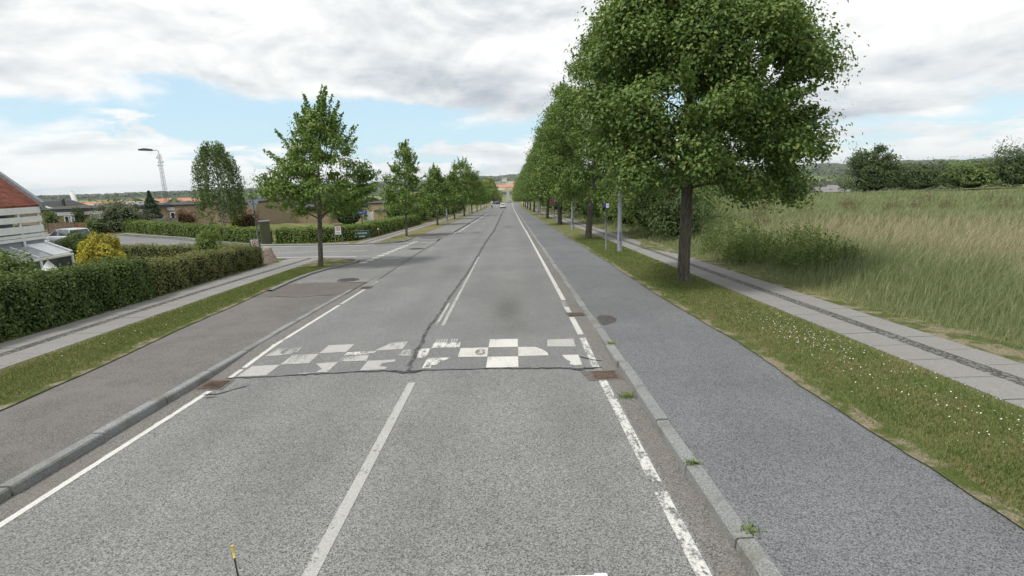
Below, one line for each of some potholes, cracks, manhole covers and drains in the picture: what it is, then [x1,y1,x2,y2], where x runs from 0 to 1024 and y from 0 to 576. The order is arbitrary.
drain grate [190,379,235,392]
crack [205,210,603,398]
drain grate [580,370,624,381]
